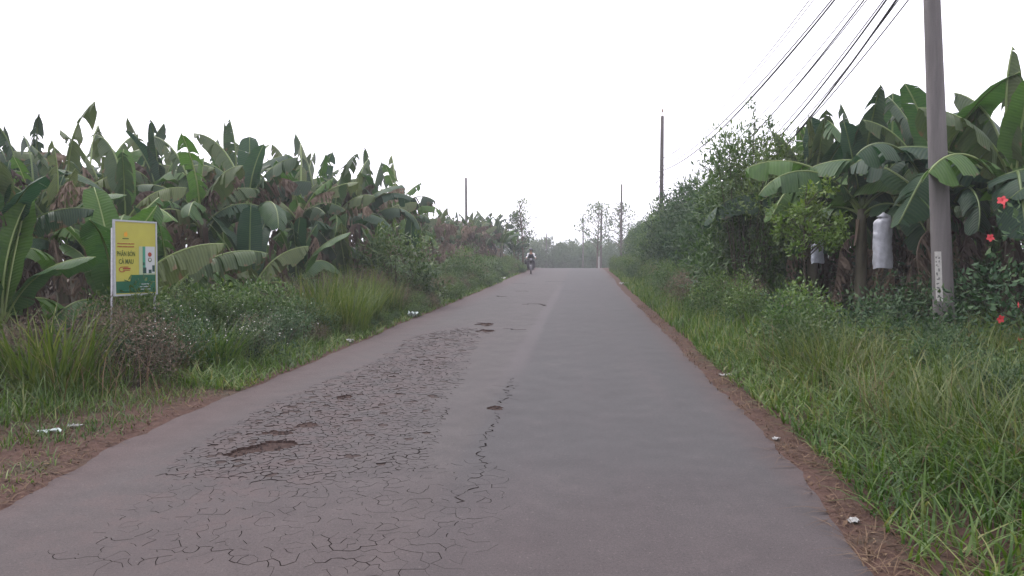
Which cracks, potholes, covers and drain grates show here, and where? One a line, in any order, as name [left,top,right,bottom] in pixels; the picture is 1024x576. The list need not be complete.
pothole [222,440,298,458]
crack [78,460,509,576]
crack [453,378,518,520]
crack [160,328,480,489]
